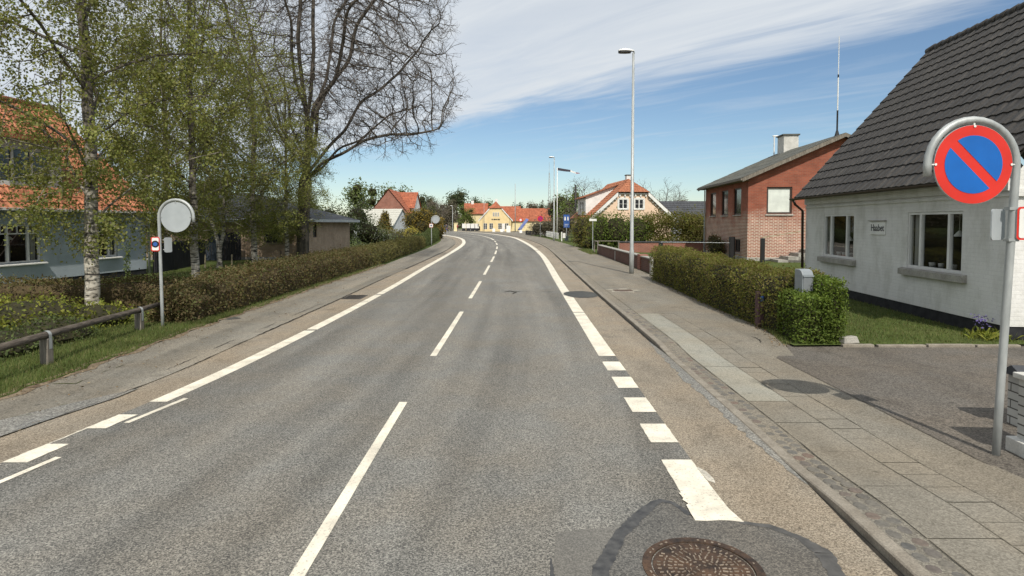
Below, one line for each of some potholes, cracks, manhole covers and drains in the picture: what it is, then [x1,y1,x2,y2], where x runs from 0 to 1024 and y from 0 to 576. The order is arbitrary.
manhole cover [642,537,766,576]
